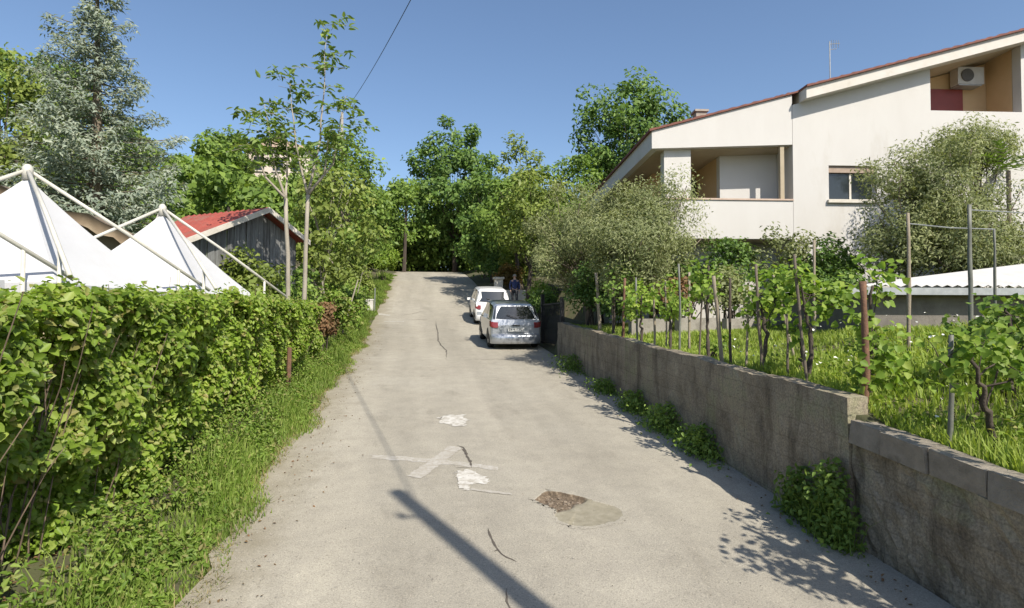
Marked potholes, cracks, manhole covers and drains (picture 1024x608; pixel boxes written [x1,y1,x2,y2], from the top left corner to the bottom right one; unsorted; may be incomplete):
crack [488,529,517,562]
crack [456,446,472,468]
pothole [528,488,631,530]
